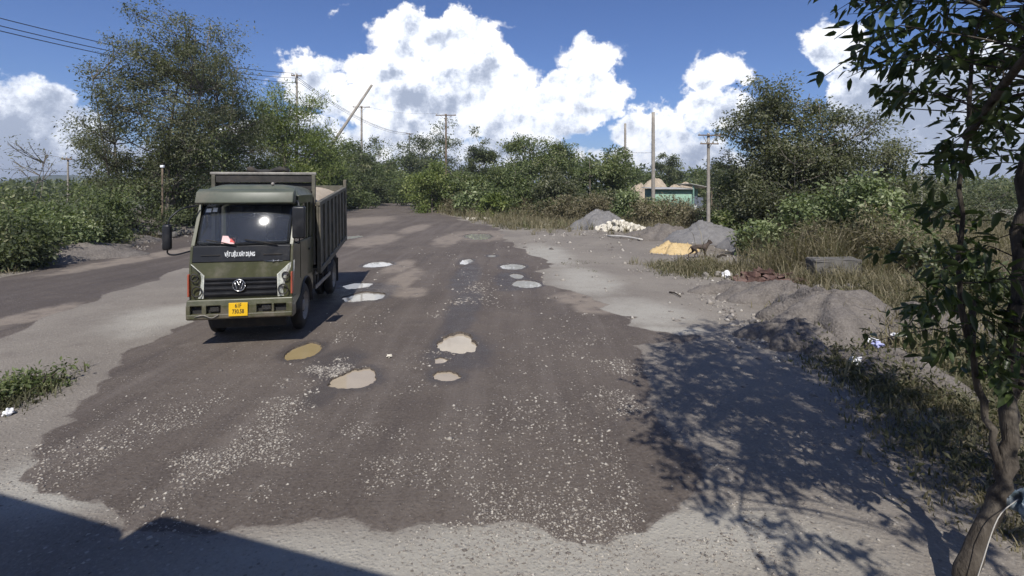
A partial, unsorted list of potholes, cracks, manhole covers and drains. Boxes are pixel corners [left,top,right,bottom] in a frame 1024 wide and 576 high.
pothole [432,370,462,381]
pothole [436,331,478,354]
pothole [512,280,542,288]
pothole [284,341,324,361]
pothole [327,367,377,389]
pothole [342,291,386,302]
